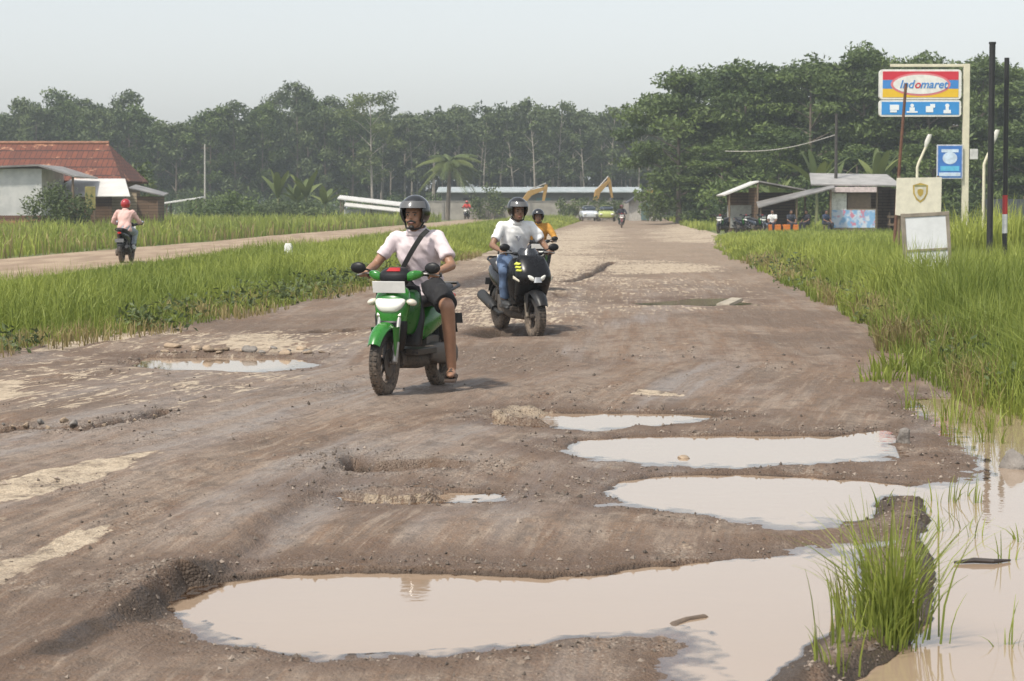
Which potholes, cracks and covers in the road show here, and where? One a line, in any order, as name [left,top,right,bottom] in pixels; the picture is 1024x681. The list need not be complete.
pothole [504,427,948,471]
crack [554,261,620,282]
pothole [93,549,893,681]
pothole [58,351,369,374]
pothole [556,469,935,533]
pothole [292,484,552,508]
